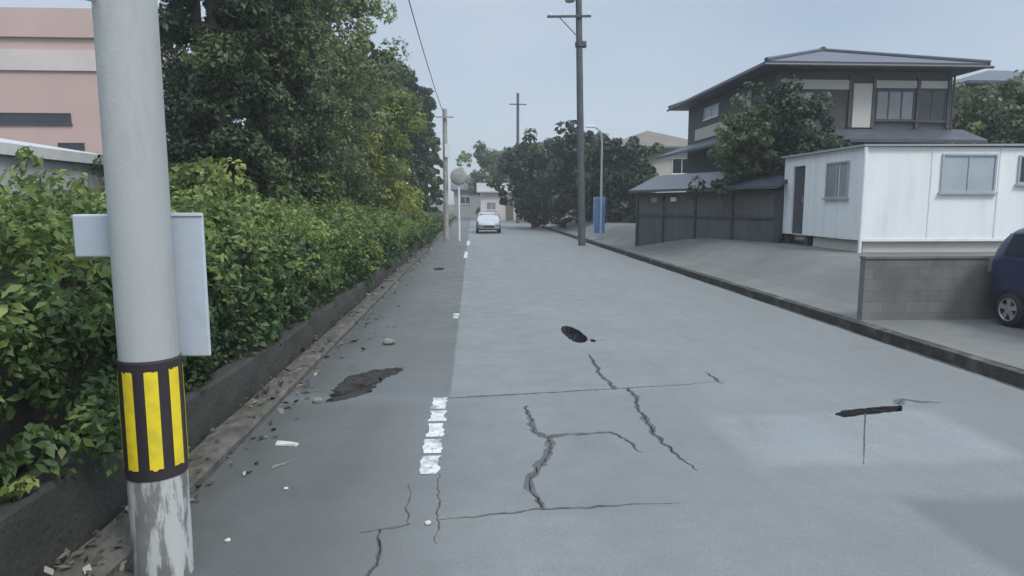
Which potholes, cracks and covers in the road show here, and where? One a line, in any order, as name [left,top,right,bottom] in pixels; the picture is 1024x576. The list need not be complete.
crack [360,484,411,576]
pothole [561,326,588,343]
crack [433,339,724,544]
pothole [325,367,406,402]
pothole [834,405,903,417]
